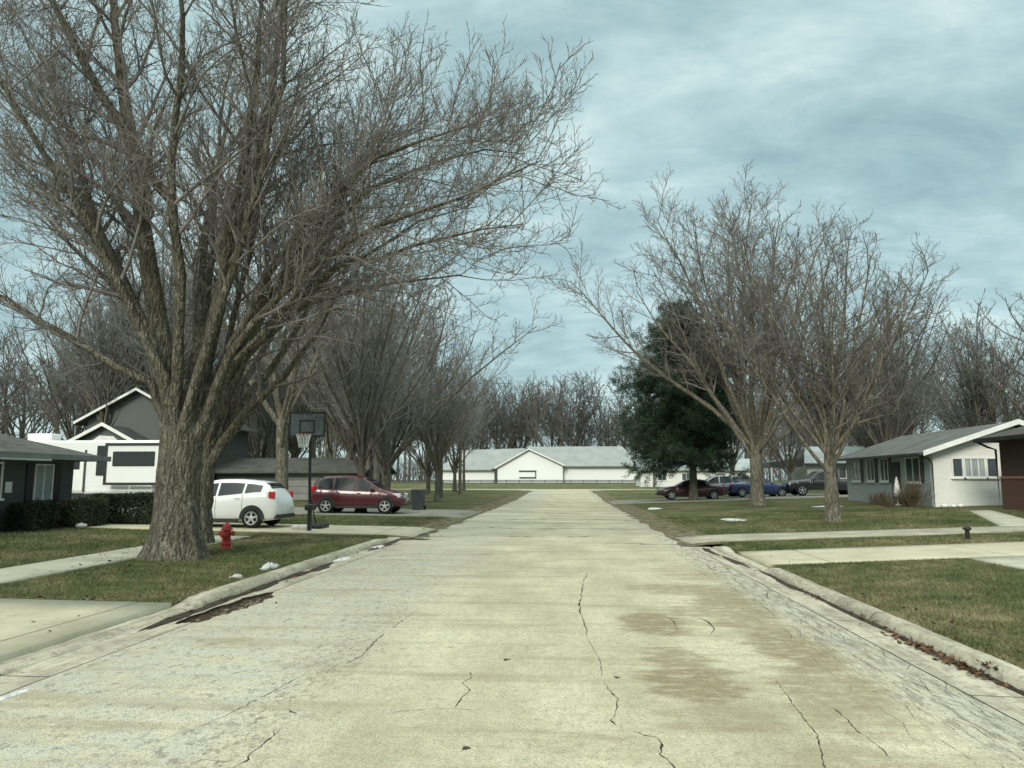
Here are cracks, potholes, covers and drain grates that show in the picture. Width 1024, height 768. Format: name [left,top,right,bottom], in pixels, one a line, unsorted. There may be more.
crack [678,552,1024,768]
crack [578,573,676,768]
crack [163,615,494,740]
crack [197,709,297,768]
pothole [175,592,274,628]
